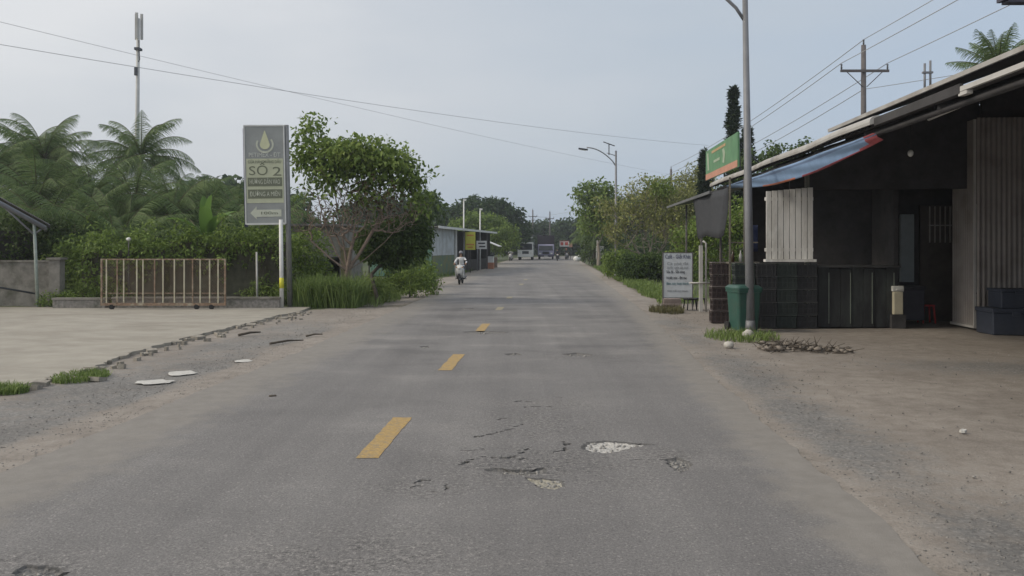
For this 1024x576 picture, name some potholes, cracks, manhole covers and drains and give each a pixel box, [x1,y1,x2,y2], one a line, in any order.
crack [410,480,449,493]
crack [458,397,562,465]
pothole [581,440,655,454]
pothole [664,457,693,473]
pothole [11,564,71,576]
pothole [525,477,565,490]
